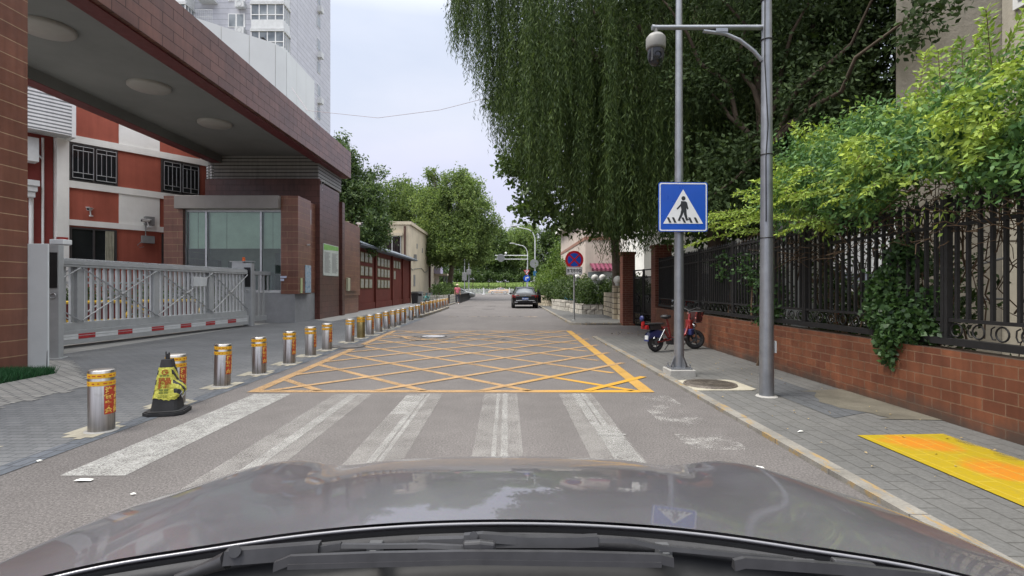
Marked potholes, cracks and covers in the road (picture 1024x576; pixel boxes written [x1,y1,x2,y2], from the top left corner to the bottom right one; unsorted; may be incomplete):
manhole cover [678,379,756,391]
